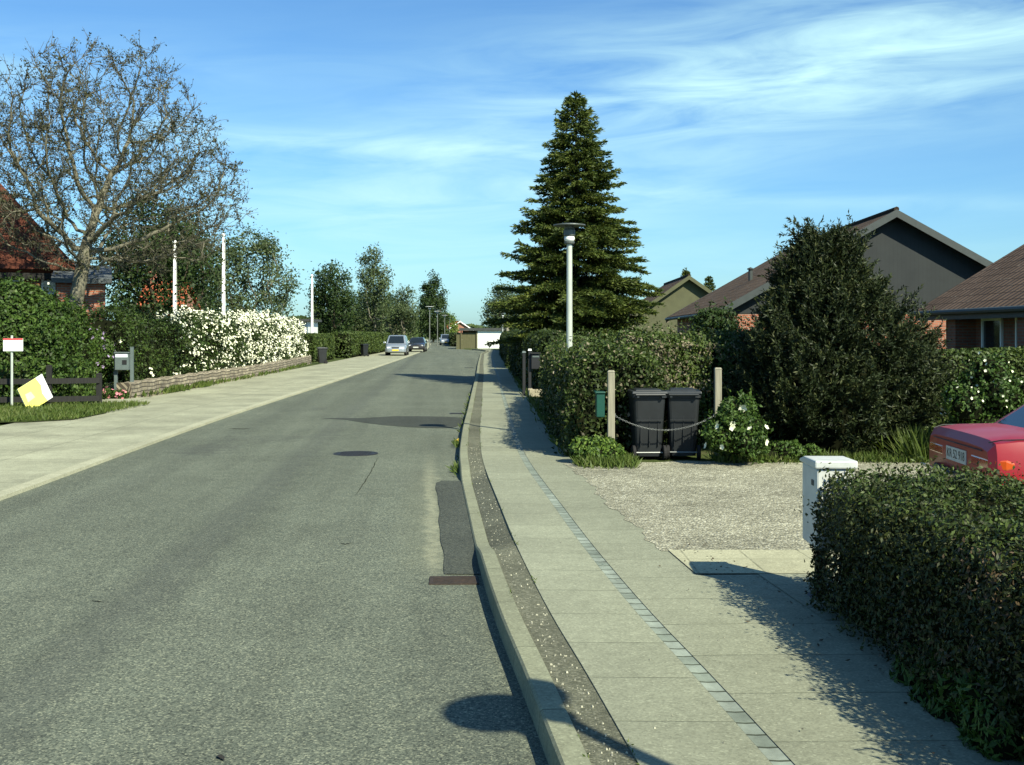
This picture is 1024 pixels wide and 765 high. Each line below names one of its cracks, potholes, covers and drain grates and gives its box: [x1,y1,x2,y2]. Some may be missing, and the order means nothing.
drain grate [429,576,479,585]
